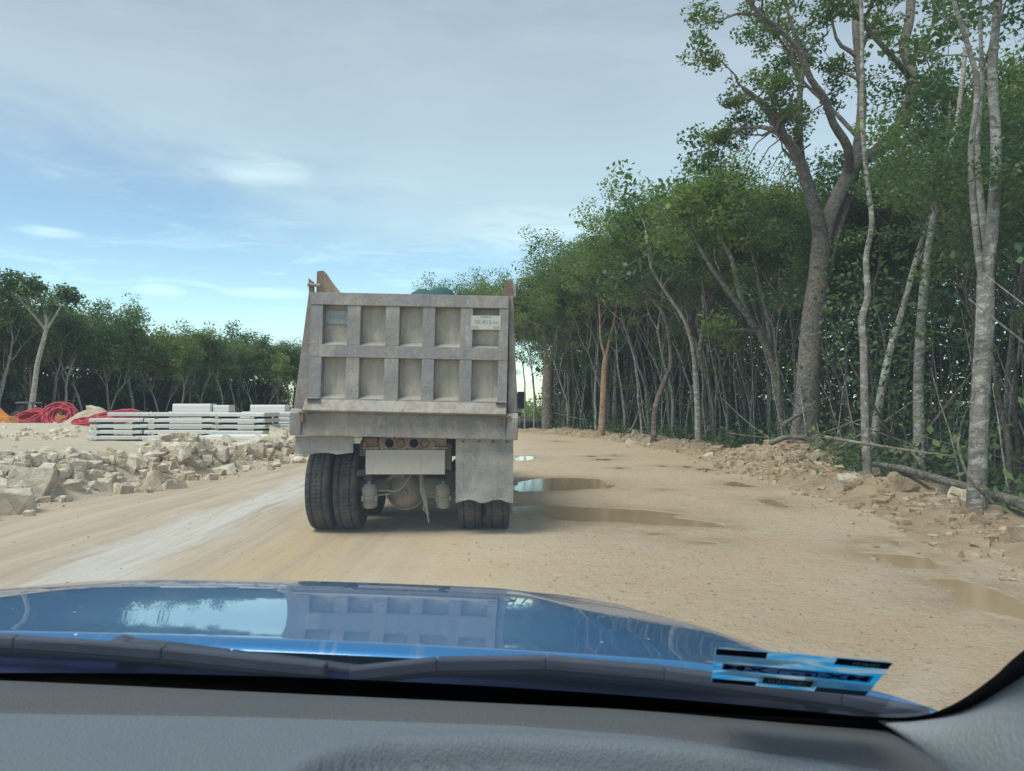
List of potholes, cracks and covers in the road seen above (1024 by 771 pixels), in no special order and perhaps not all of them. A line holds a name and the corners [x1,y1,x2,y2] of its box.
pothole [513,477,616,492]
pothole [509,504,727,527]
pothole [921,577,1024,619]
pothole [853,551,942,570]
pothole [758,498,794,508]
